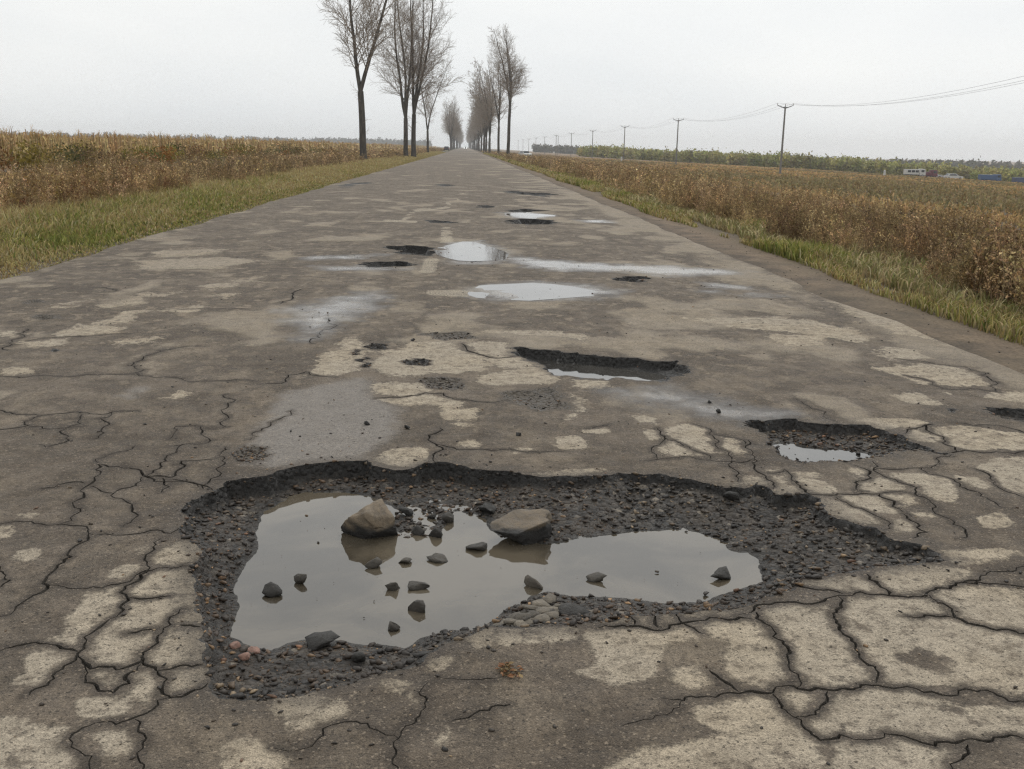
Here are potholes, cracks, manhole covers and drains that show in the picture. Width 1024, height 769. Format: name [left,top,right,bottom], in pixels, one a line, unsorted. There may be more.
crack [651,425,1022,538]
crack [909,360,998,392]
crack [381,392,504,403]
